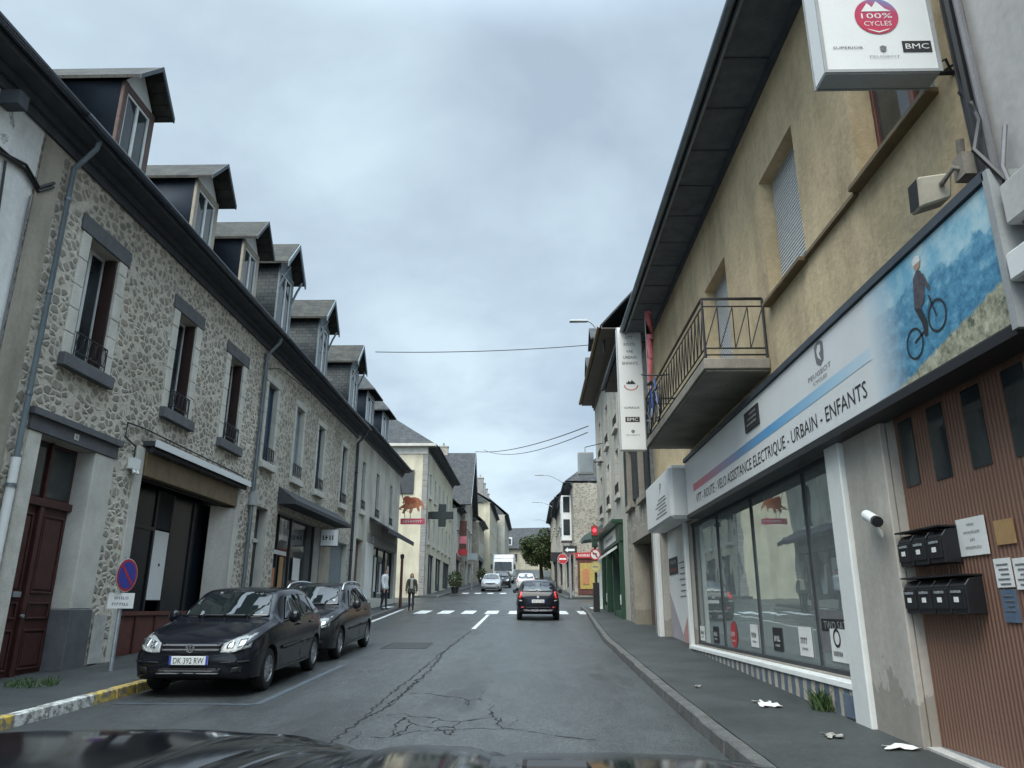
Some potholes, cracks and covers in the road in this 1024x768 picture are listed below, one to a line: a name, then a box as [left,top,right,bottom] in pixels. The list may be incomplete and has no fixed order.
crack [330,631,593,744]
